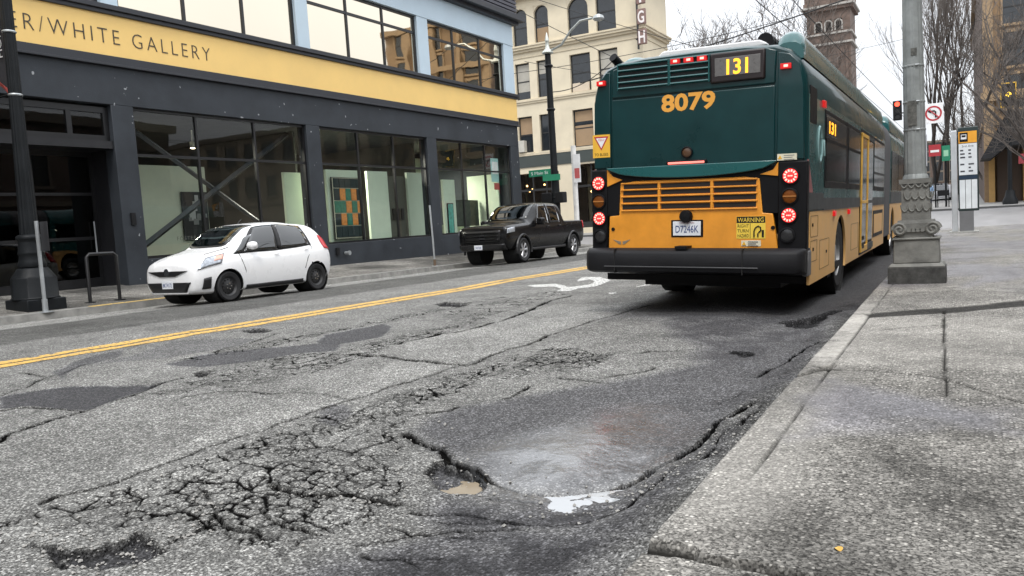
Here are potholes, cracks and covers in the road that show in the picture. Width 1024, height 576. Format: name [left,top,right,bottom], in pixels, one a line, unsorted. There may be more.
pothole [423,460,489,494]
pothole [778,310,843,329]
pothole [21,529,171,570]
pothole [508,482,650,518]
crack [0,291,764,568]
